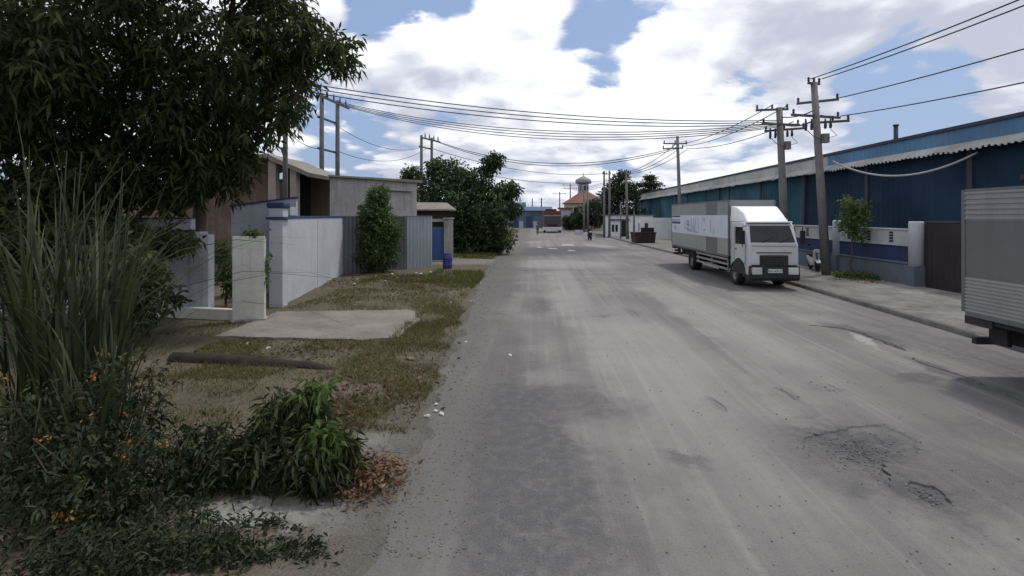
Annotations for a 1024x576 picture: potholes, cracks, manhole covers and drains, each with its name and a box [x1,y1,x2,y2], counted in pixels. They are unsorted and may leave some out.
pothole [781,387,799,400]
pothole [797,423,922,487]
pothole [904,479,955,509]
pothole [808,381,844,394]
